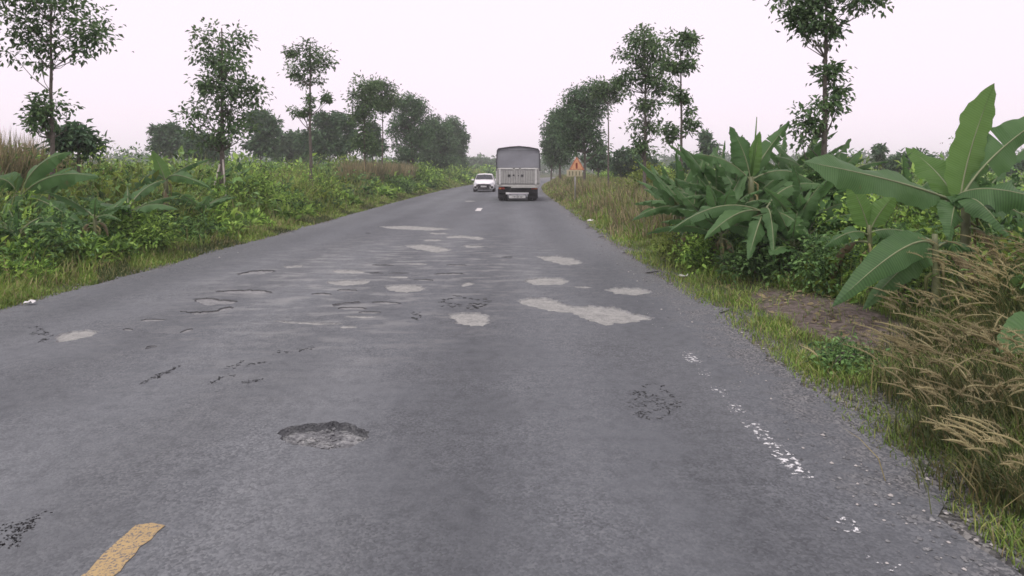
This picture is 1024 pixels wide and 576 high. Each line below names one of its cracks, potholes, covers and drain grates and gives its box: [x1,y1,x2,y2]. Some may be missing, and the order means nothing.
crack [209,346,315,384]
crack [0,511,53,549]
pothole [277,421,369,449]
crack [139,365,181,385]
crack [627,384,682,420]
crack [440,295,488,310]
